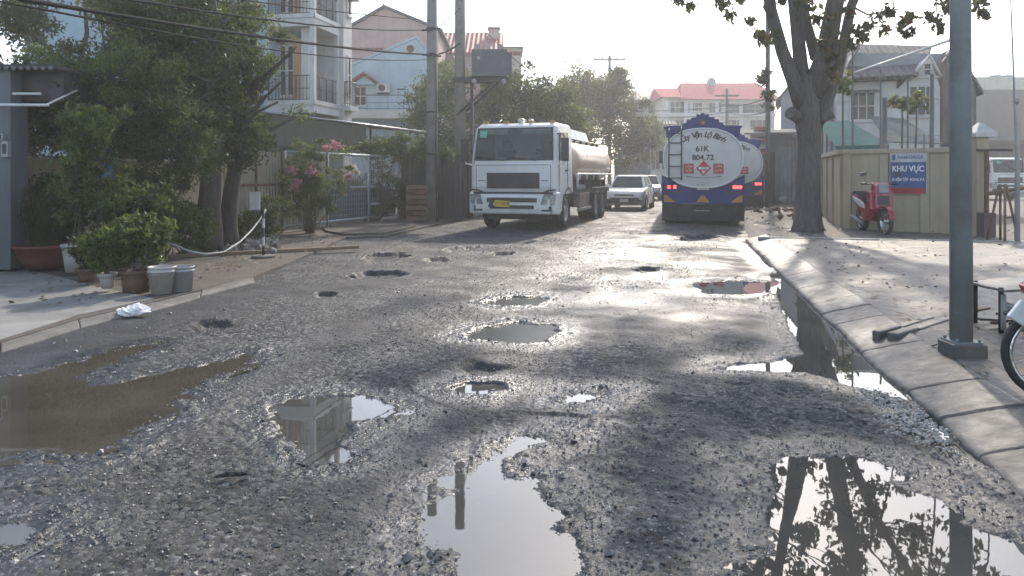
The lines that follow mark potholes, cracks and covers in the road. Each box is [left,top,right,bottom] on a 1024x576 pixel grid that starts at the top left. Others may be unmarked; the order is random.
pothole [264,392,415,467]
pothole [630,266,663,274]
pothole [418,428,598,576]
pothole [184,318,240,333]
pothole [461,319,563,344]
pothole [480,295,553,307]
pothole [311,291,340,299]
pothole [444,380,512,395]
pothole [721,449,1024,576]
pothole [0,341,270,466]
pothole [688,279,776,295]
pothole [344,269,411,280]
